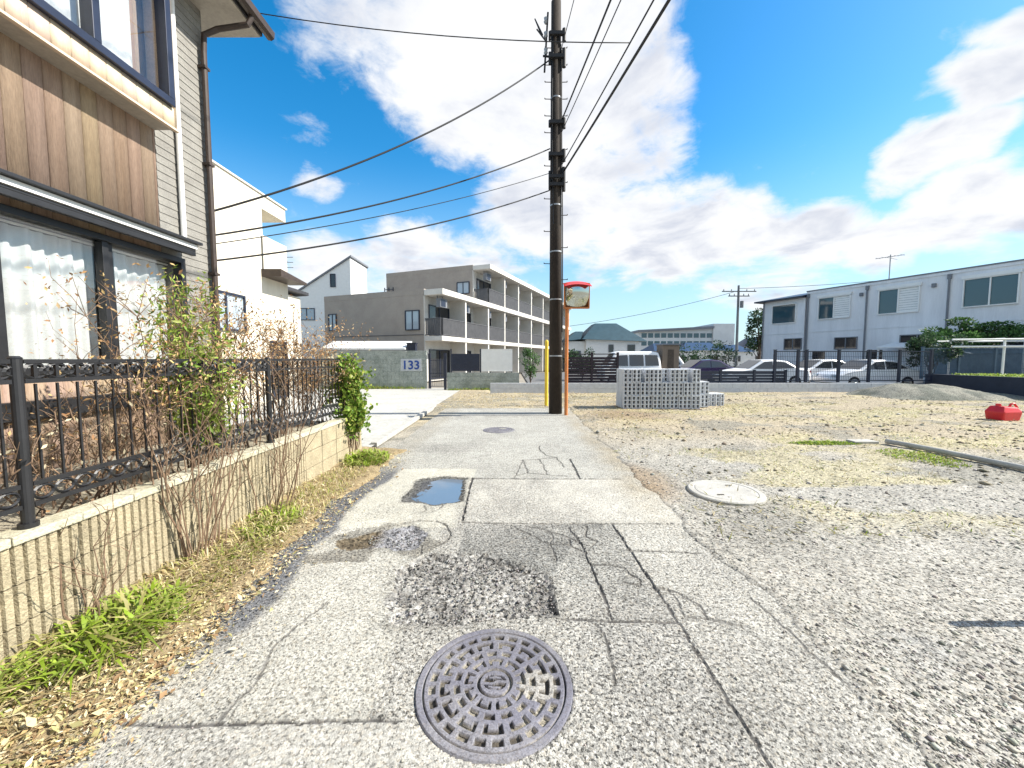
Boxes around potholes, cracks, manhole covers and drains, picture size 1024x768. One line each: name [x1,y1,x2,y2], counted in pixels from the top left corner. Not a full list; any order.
manhole cover [415,628,573,764]
crack [496,525,874,712]
crack [215,601,328,724]
manhole cover [687,480,767,506]
crack [512,445,568,478]
pothole [334,525,429,551]
pothole [382,552,562,627]
pothole [400,476,469,506]
